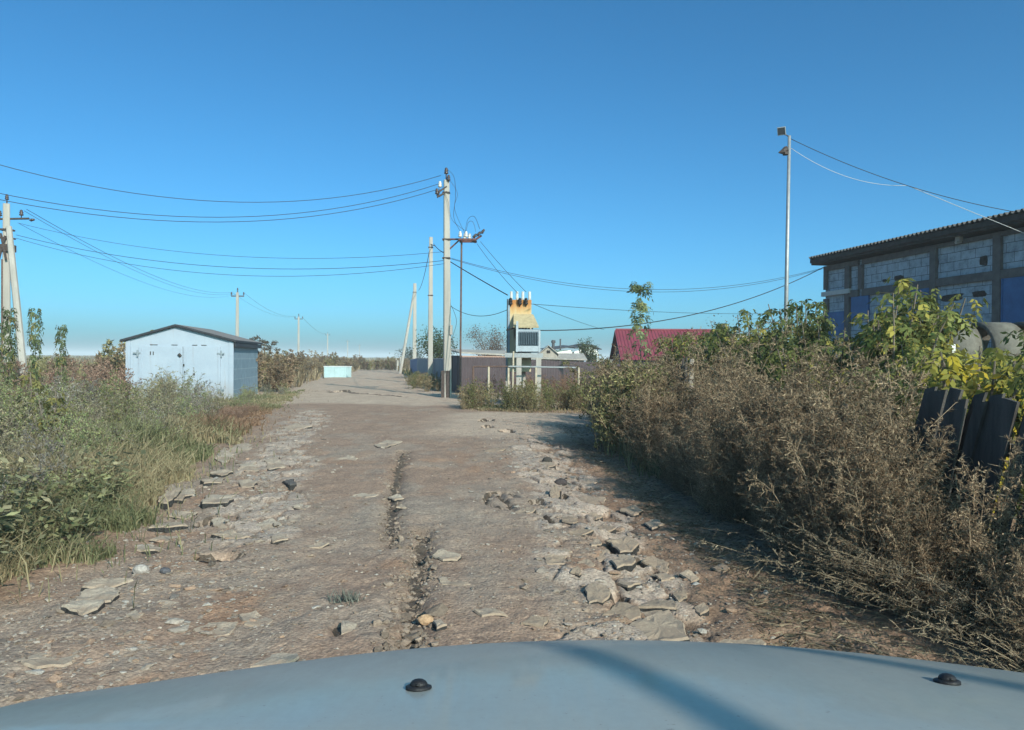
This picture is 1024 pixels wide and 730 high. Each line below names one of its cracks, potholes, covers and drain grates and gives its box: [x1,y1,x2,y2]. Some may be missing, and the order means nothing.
crack [366,452,456,652]
